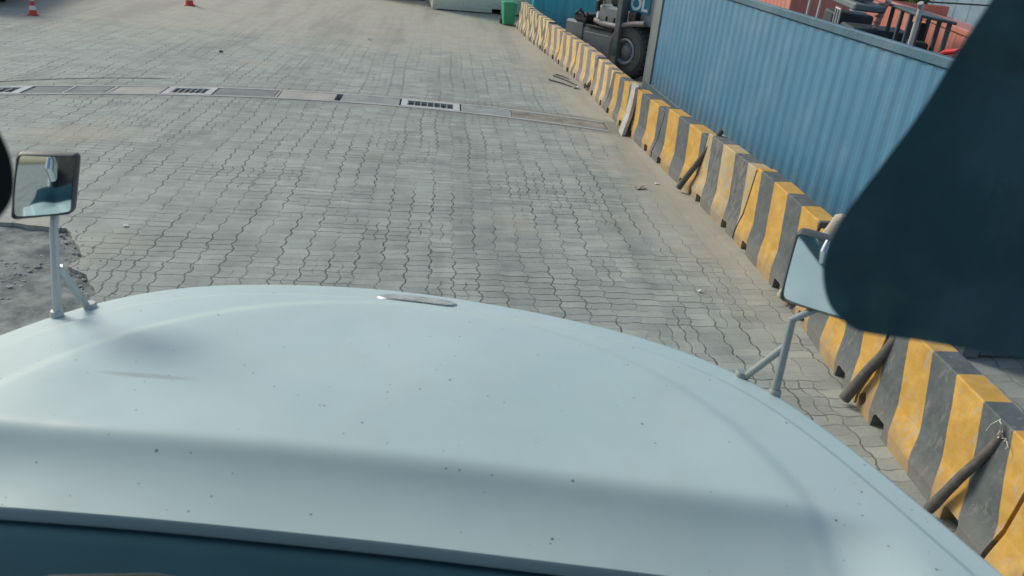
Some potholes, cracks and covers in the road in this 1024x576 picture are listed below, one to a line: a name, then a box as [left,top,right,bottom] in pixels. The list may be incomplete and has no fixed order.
drain grate [401,99,460,111]
drain grate [162,87,219,95]
